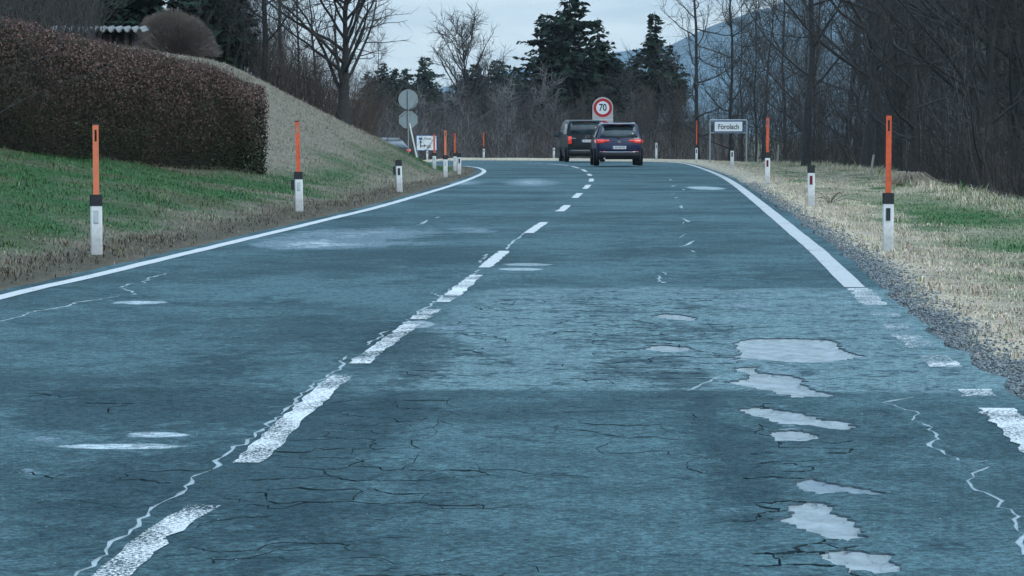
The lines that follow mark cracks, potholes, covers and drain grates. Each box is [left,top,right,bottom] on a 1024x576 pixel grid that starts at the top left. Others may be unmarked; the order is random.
pothole [766,429,821,442]
pothole [650,313,698,321]
pothole [722,366,835,398]
crack [1,273,166,321]
pothole [730,338,866,363]
crack [8,355,708,576]
crack [730,403,861,576]
pothole [814,549,902,574]
crack [882,397,1024,555]
pothole [773,501,869,541]
pothole [735,406,861,429]
pothole [641,344,694,352]
